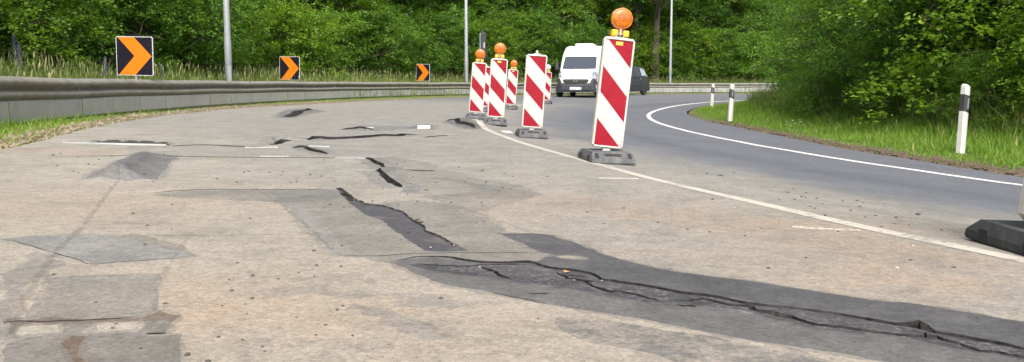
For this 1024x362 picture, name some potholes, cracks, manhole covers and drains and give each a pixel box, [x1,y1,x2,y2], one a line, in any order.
crack [292,118,475,154]
crack [341,252,1024,358]
crack [366,157,434,187]
